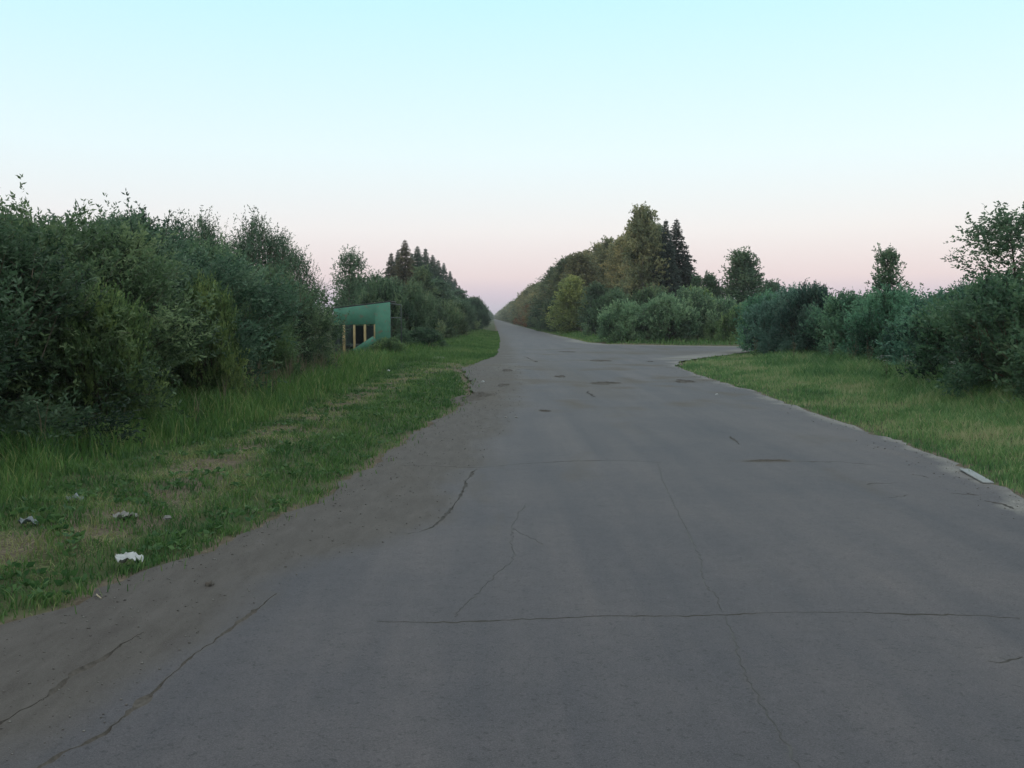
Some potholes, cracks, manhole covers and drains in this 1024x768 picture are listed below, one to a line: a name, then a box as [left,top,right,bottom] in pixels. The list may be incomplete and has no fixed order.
crack [380,505,1011,623]
crack [409,460,660,534]
